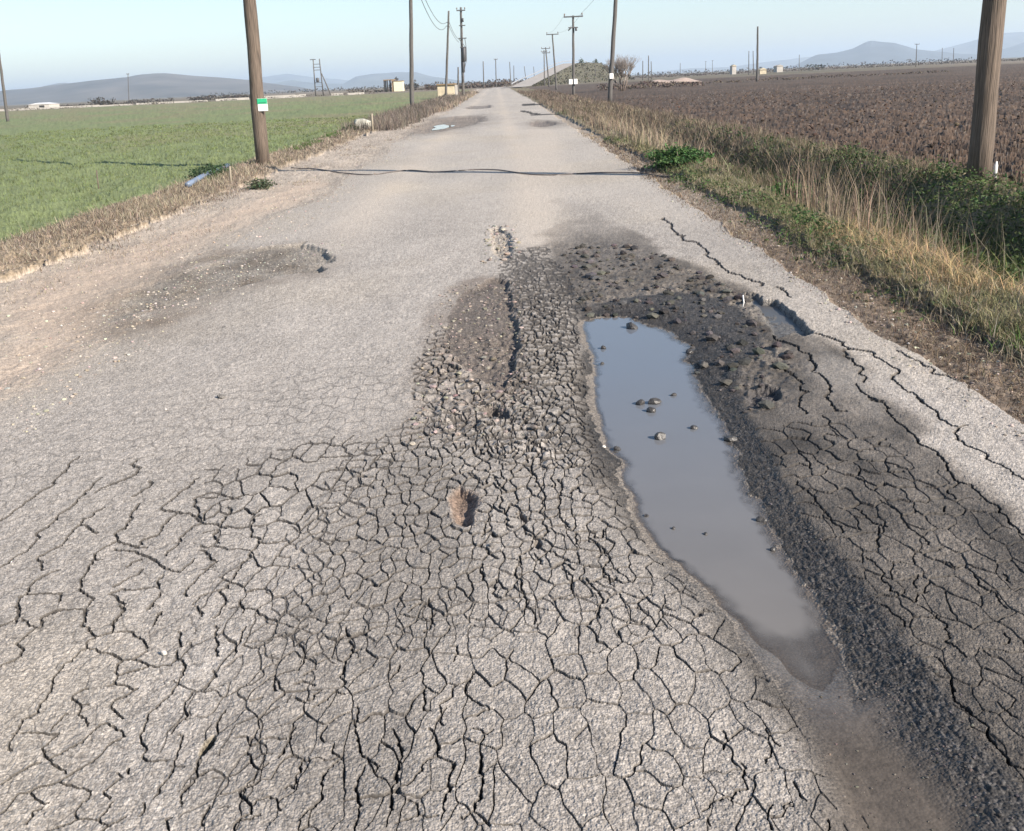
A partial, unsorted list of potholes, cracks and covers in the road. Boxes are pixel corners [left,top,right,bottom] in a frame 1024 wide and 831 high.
pothole [481,402,512,420]
pothole [410,115,489,134]
pothole [574,292,1024,831]
pothole [116,241,337,320]
pothole [488,225,516,259]
crack [0,217,1024,831]
pothole [438,277,523,391]
